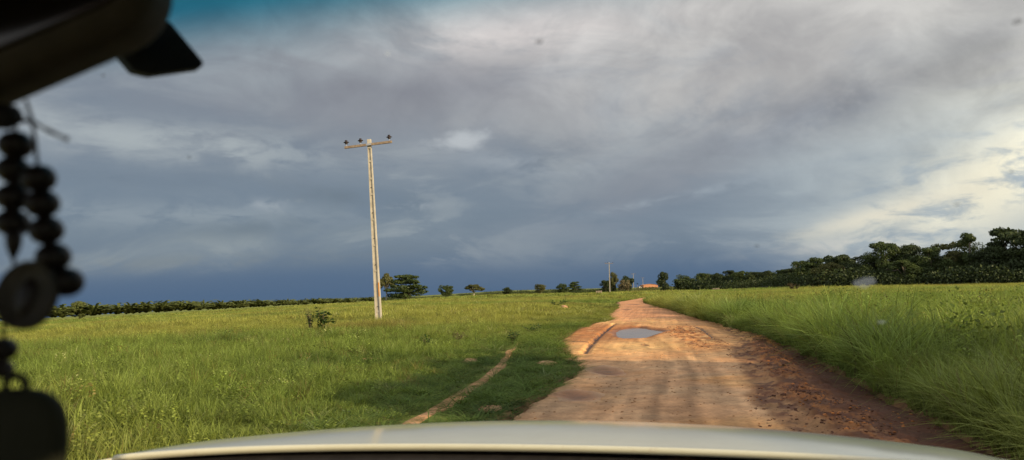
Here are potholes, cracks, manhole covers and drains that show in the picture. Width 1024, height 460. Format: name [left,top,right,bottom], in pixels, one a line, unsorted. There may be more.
pothole [603,327,670,338]
